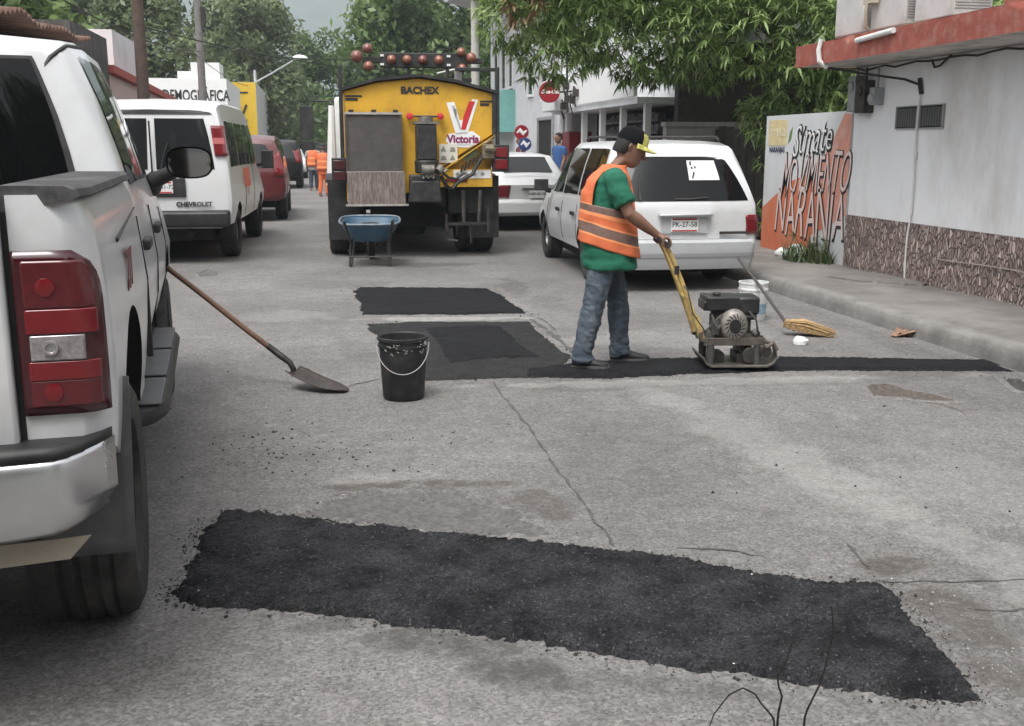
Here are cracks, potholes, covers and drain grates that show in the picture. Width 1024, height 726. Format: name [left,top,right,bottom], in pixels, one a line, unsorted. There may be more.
crack [676,547,758,556]
crack [847,543,1023,611]
